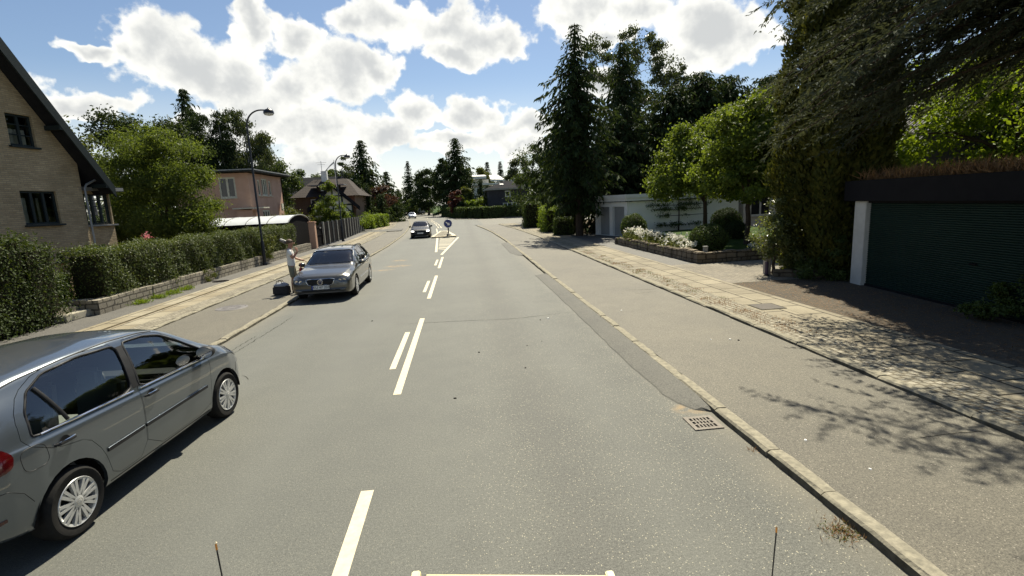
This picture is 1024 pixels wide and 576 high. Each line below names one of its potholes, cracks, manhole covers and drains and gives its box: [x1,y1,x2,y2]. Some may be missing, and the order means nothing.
drain grate [683,415,724,431]
